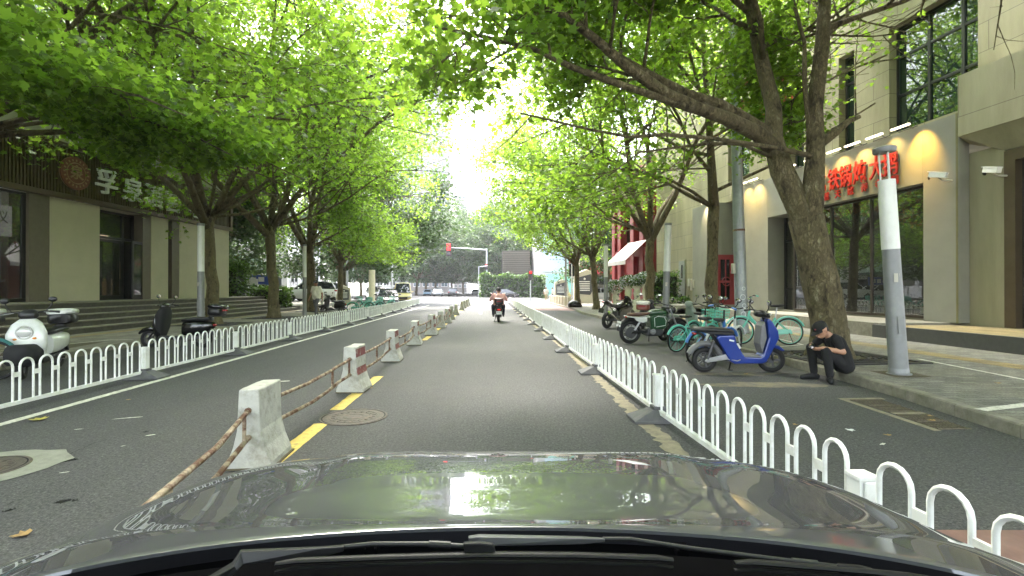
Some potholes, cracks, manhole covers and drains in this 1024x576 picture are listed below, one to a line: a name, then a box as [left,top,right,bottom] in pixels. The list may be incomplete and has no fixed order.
manhole cover [0,449,75,481]
drain grate [895,413,972,430]
drain grate [851,399,921,413]
manhole cover [319,408,388,426]
